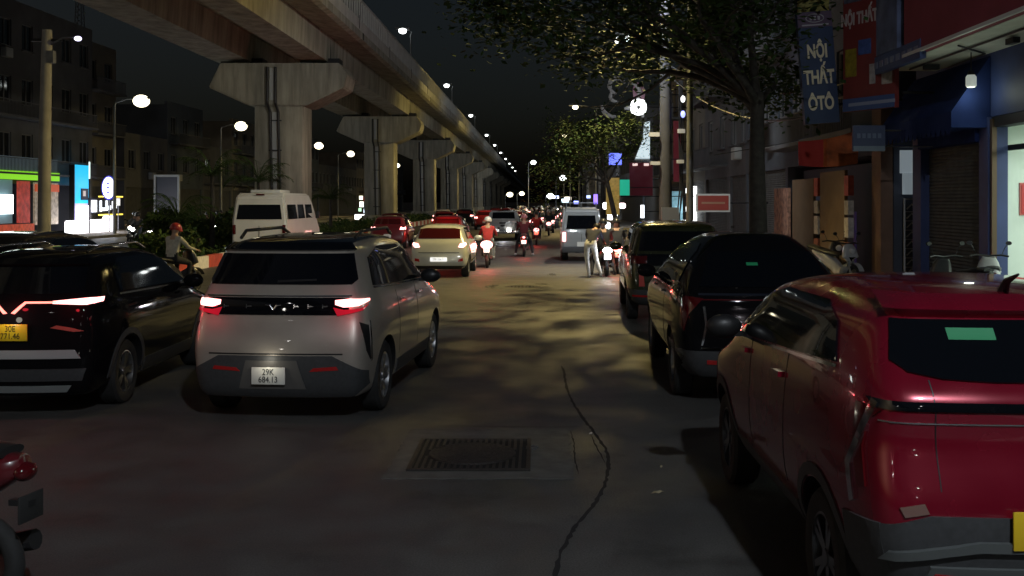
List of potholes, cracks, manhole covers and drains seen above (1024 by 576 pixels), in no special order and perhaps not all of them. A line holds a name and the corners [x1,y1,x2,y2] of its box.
crack [552,366,611,576]
